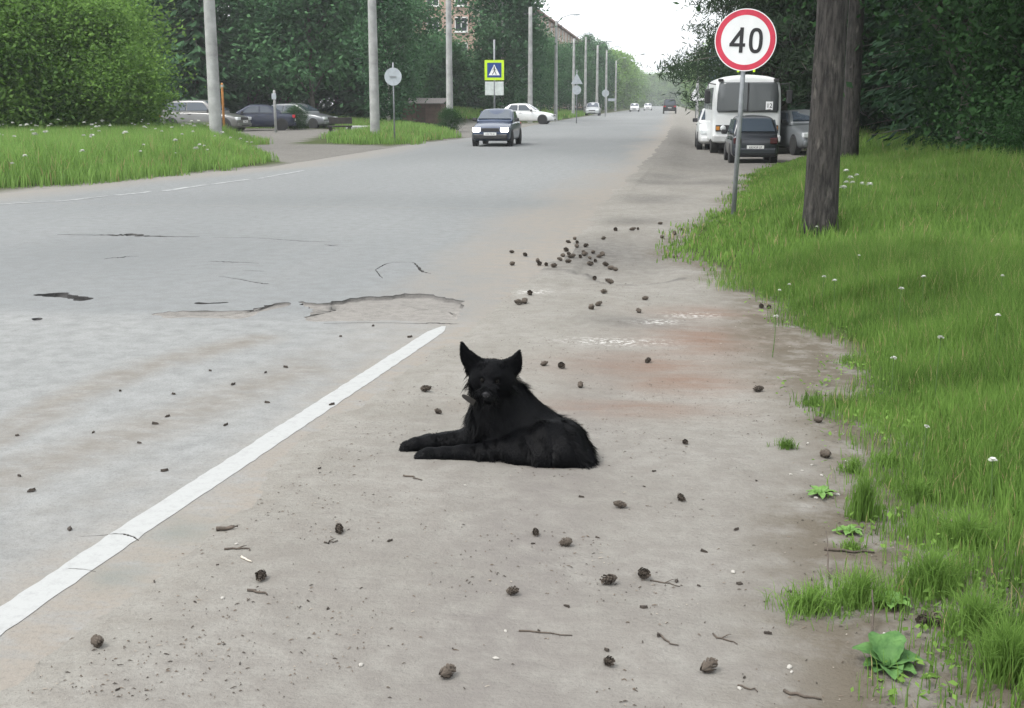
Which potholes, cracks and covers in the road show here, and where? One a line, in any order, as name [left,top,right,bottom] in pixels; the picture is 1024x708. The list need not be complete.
crack [375,262,431,278]
